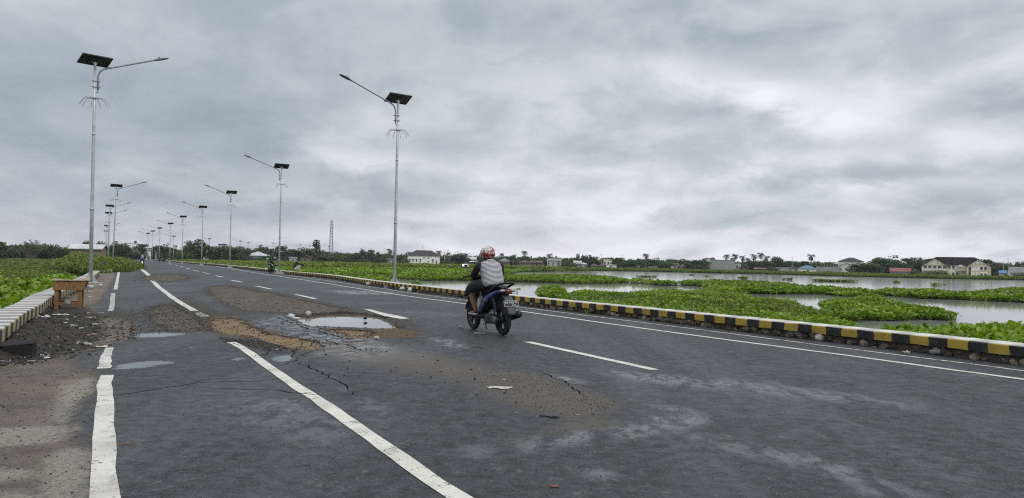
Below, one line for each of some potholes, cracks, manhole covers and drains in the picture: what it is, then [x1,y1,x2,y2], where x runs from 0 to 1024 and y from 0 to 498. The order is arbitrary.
pothole [208,286,341,314]
crack [538,370,592,396]
pothole [293,314,398,328]
crack [96,314,431,397]
pothole [148,305,205,332]
pothole [207,318,325,350]
